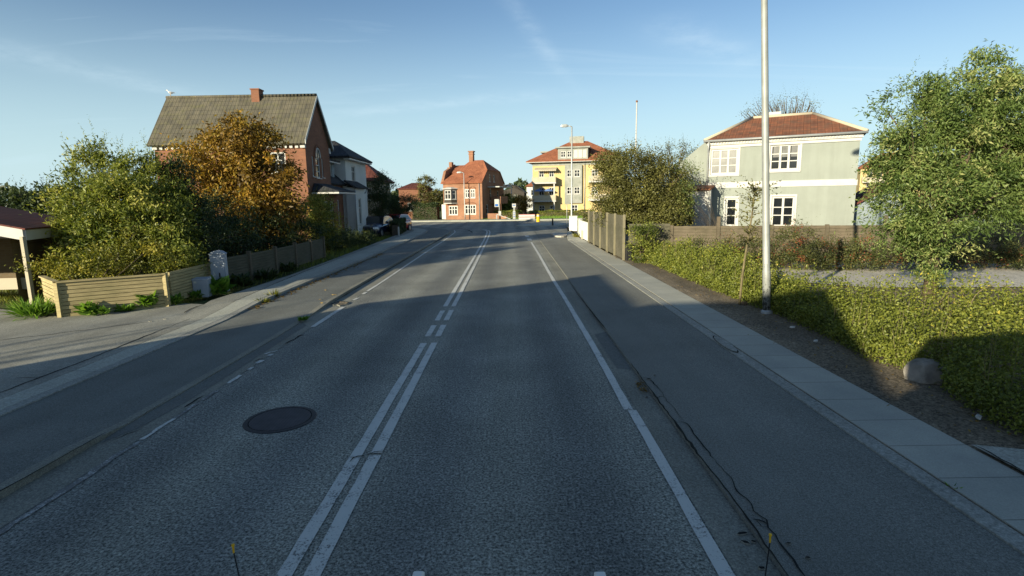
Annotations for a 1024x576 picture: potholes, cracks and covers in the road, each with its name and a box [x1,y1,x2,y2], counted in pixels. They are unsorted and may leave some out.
manhole cover [242,406,317,434]
crack [632,365,805,576]
